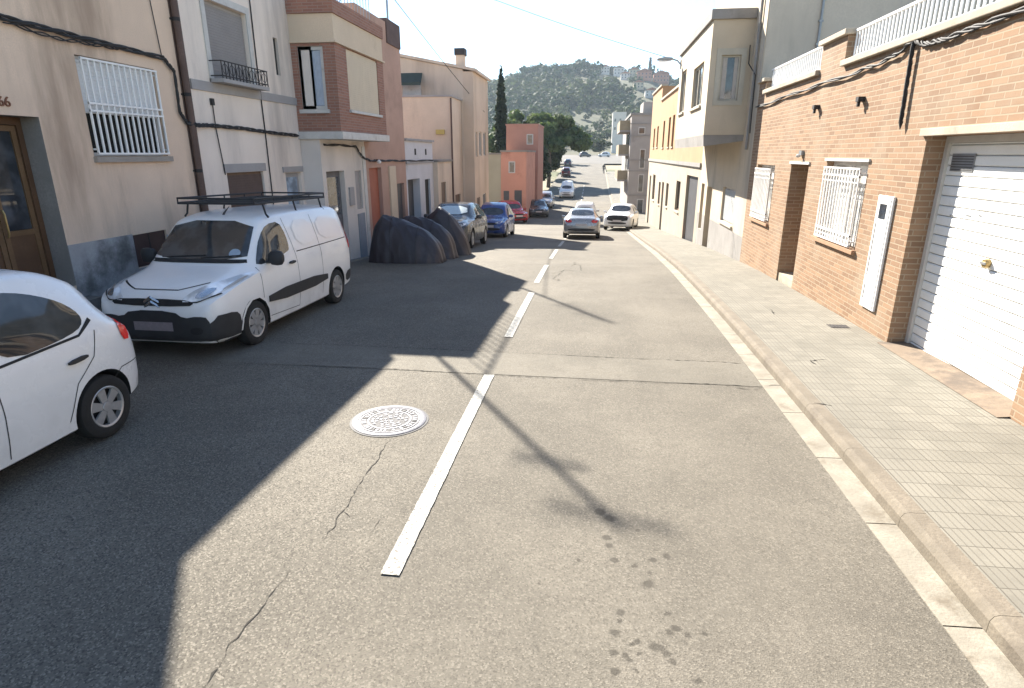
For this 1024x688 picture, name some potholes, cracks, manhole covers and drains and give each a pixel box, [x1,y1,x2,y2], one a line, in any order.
manhole cover [349,405,429,437]
crack [203,572,289,688]
crack [323,446,409,540]
